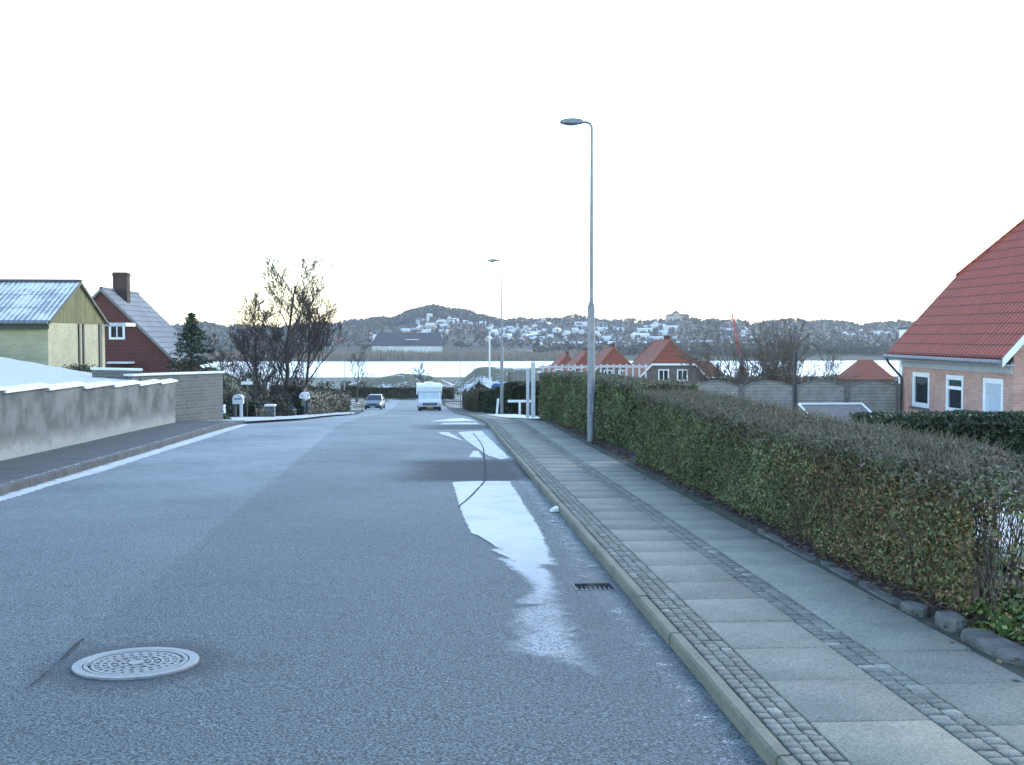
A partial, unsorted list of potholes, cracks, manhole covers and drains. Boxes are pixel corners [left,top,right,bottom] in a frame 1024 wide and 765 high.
crack [25,634,88,691]
manhole cover [71,647,199,680]
crack [458,433,487,508]
drain grate [571,582,618,591]
